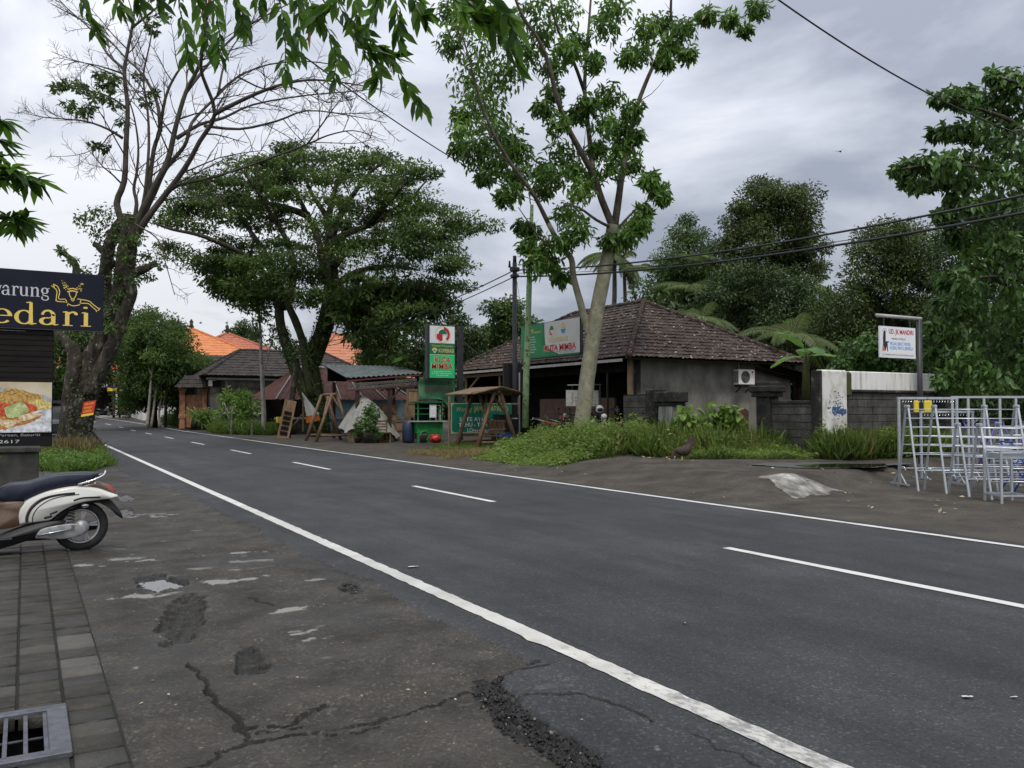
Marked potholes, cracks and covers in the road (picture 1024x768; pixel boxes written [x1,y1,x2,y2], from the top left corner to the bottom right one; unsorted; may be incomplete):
pothole [152,593,210,649]
crack [185,662,655,768]
crack [691,733,761,768]
pothole [233,646,274,676]
pothole [337,581,364,594]
drain grate [0,703,73,768]
pothole [132,573,190,593]
